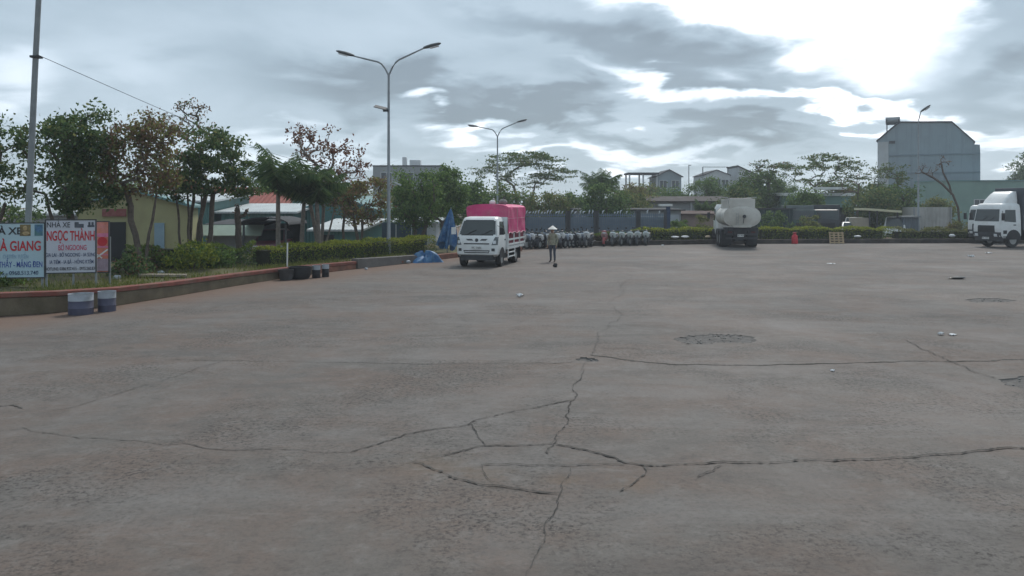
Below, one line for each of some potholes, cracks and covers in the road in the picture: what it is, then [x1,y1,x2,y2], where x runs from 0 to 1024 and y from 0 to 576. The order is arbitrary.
crack [23,427,339,452]
crack [697,447,1024,477]
crack [353,377,688,576]
crack [56,283,1024,410]
pothole [998,376,1024,389]
